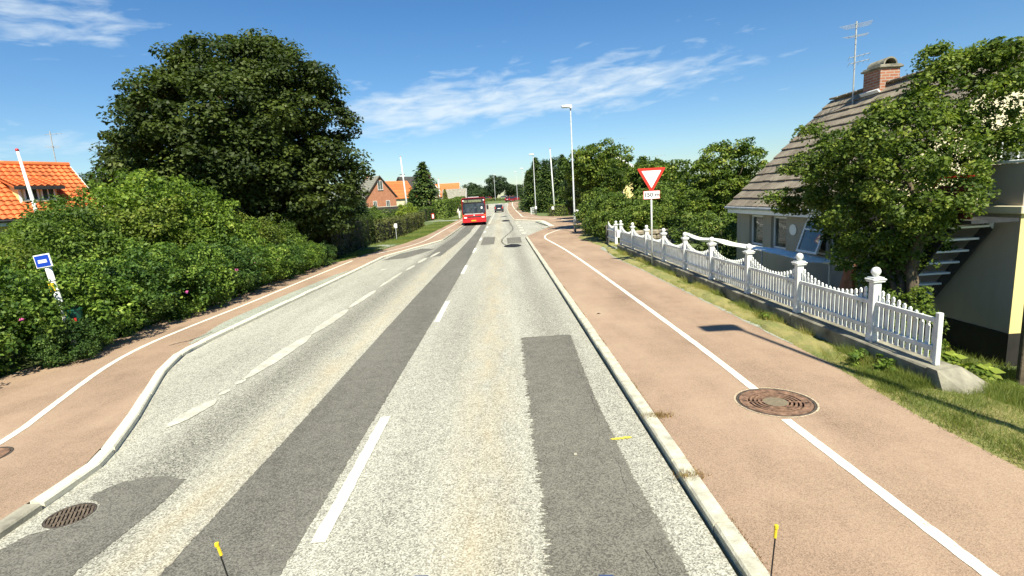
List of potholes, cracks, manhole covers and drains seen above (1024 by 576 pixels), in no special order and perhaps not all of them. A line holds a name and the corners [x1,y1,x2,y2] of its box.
manhole cover [736,389,817,417]
manhole cover [0,447,14,459]
drain grate [42,503,97,529]
